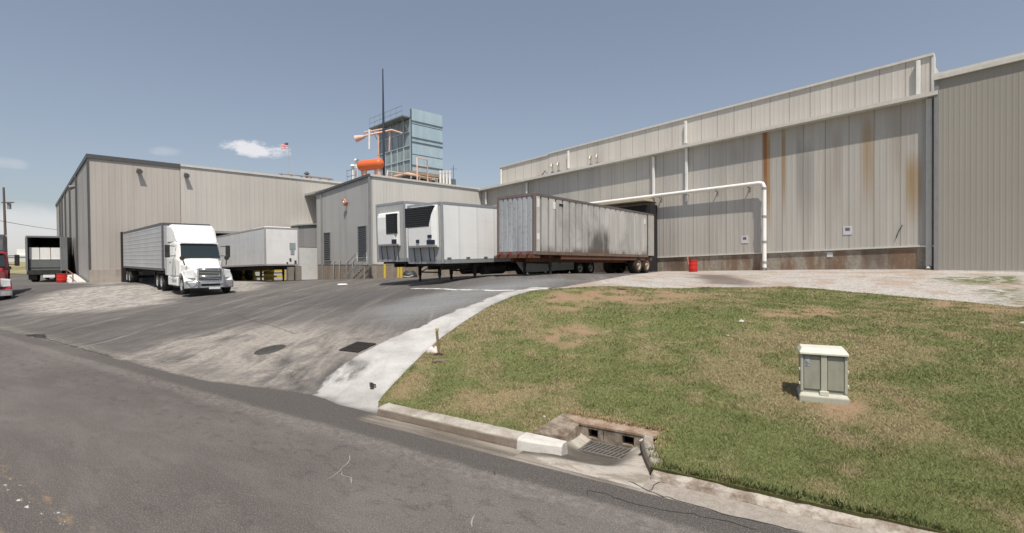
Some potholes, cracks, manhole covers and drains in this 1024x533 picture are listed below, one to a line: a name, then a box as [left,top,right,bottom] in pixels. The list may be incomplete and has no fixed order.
drain grate [514,413,665,488]
crack [587,482,753,529]
manhole cover [254,344,286,355]
drain grate [339,341,376,353]
